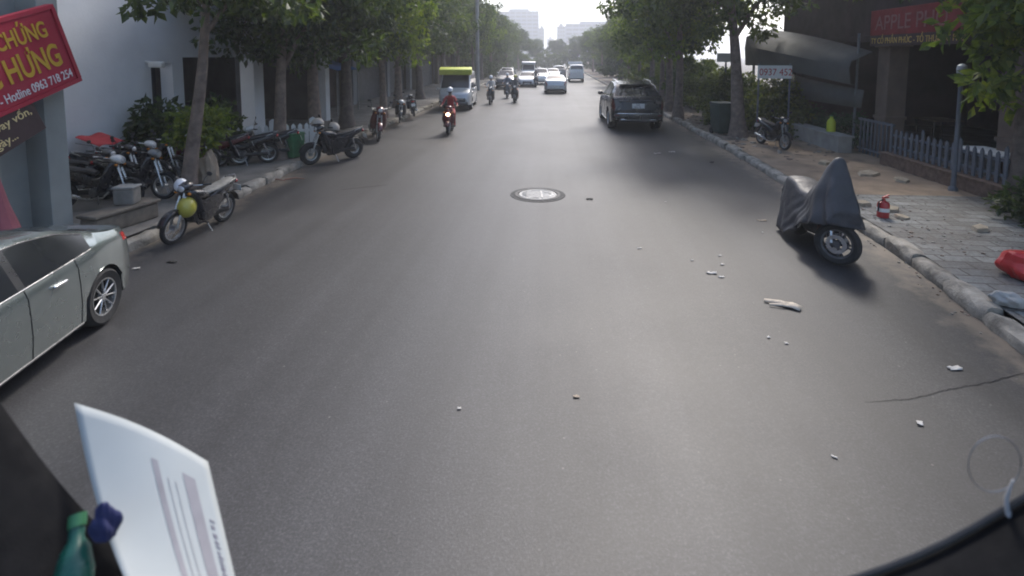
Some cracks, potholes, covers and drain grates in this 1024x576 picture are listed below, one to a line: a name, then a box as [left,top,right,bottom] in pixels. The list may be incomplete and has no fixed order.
crack [885,373,1021,401]
manhole cover [510,188,565,202]
